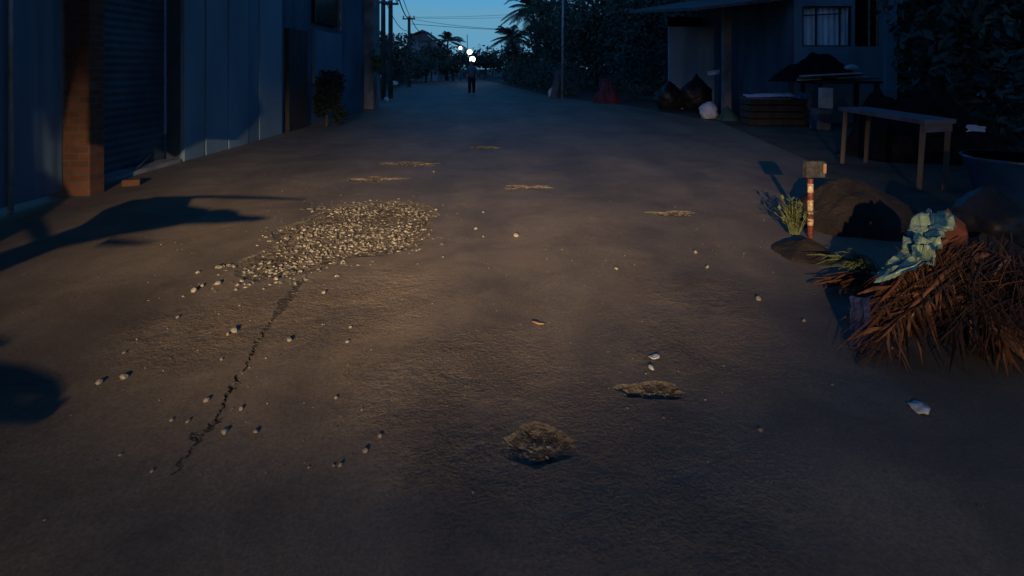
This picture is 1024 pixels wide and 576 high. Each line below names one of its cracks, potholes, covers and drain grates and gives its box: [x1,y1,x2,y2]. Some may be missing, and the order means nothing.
crack [171,276,308,475]
pothole [500,421,577,470]
pothole [610,381,685,400]
